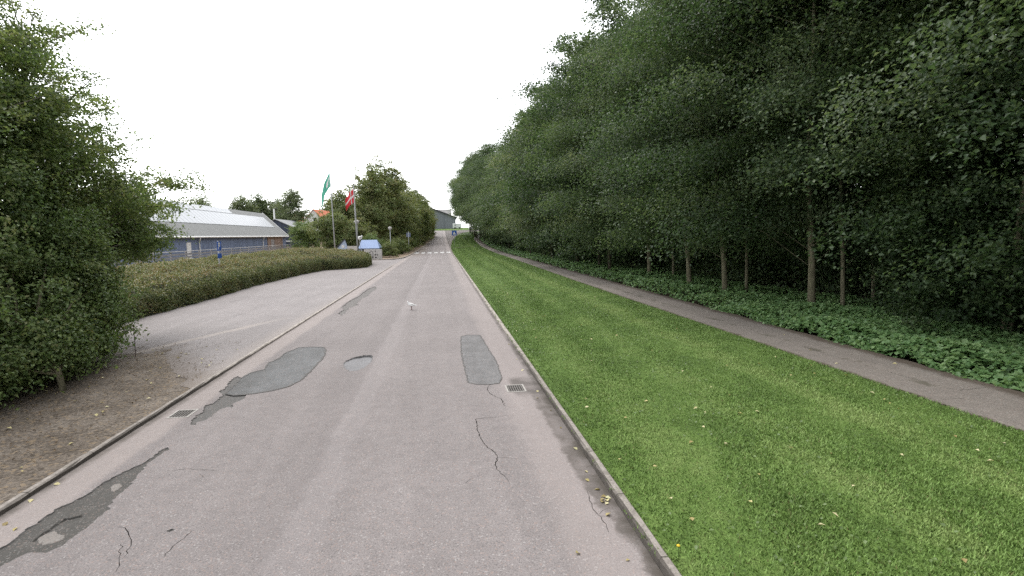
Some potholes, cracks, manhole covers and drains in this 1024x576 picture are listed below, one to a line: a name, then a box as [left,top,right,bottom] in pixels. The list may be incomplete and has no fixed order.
crack [116,527,132,571]
crack [475,386,519,480]
